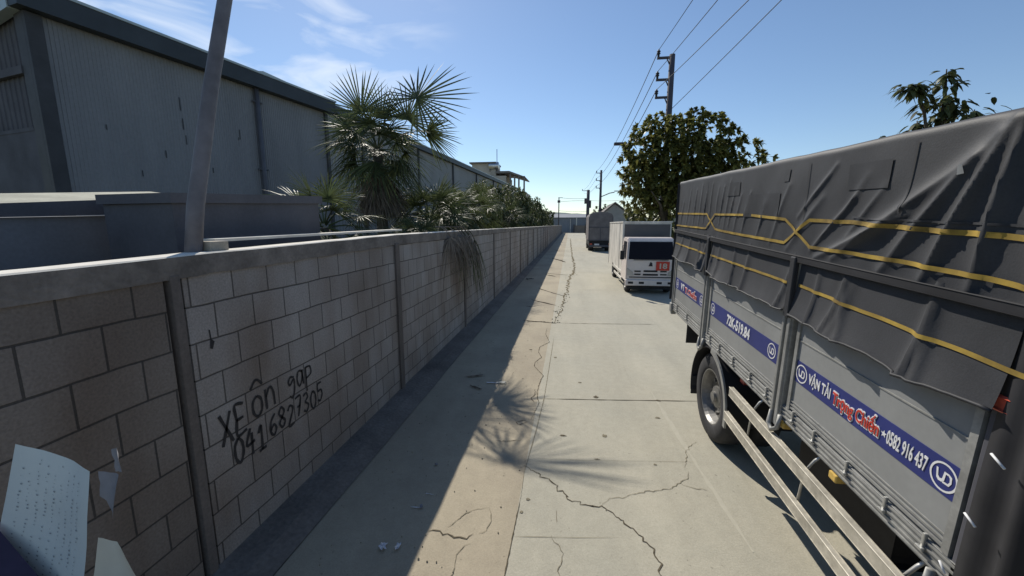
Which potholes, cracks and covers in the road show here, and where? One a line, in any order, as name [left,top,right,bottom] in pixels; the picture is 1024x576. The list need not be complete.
crack [524,239,576,323]
crack [526,442,705,576]
crack [430,507,492,576]
